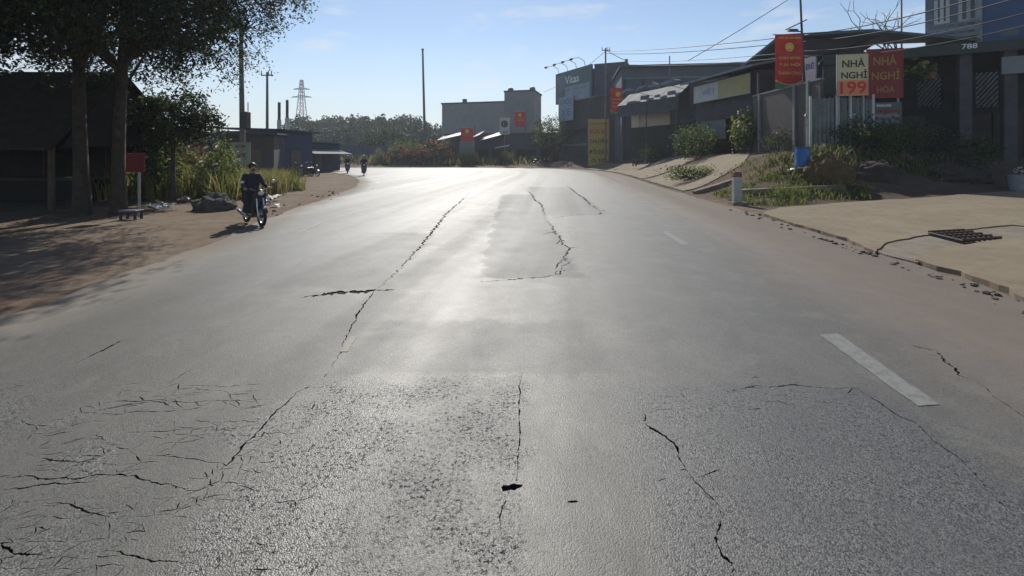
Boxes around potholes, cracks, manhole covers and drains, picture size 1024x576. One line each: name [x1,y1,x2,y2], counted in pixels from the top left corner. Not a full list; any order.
crack [0,370,321,576]
crack [663,374,1012,515]
pothole [501,483,523,492]
crack [499,377,522,529]
crack [485,186,605,282]
crack [916,346,1024,417]
crack [643,409,735,576]
drain grate [928,229,1003,243]
crack [302,198,464,377]
